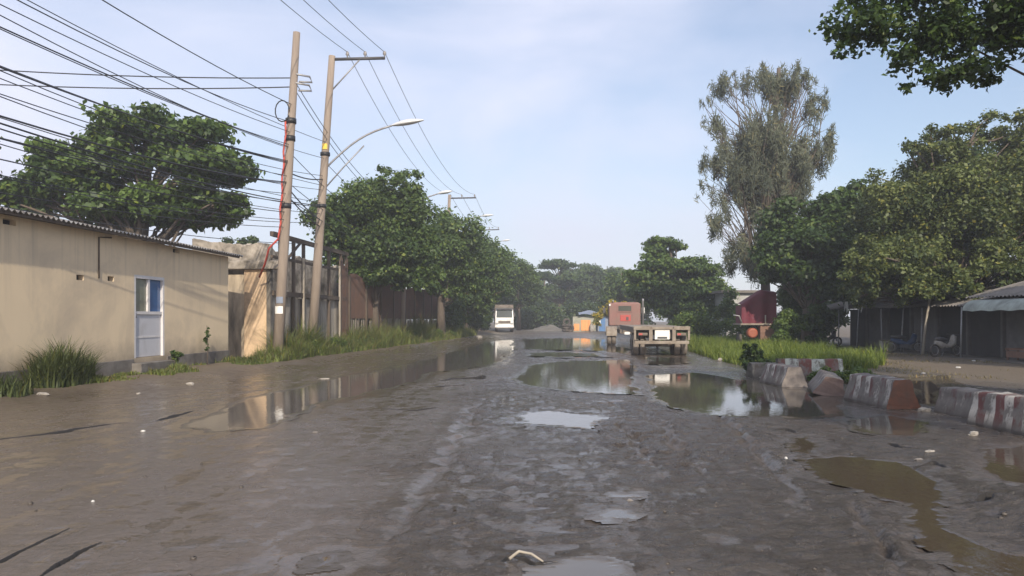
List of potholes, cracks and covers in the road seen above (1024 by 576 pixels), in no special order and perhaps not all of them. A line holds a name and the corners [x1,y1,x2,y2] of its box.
pothole [492,409,627,433]
pothole [499,550,659,576]
pothole [614,372,888,424]
crack [0,407,222,445]
pothole [580,486,669,506]
pothole [507,337,658,356]
pothole [784,453,1024,576]
pothole [125,339,534,441]
pothole [558,502,667,531]
pothole [489,358,674,401]
